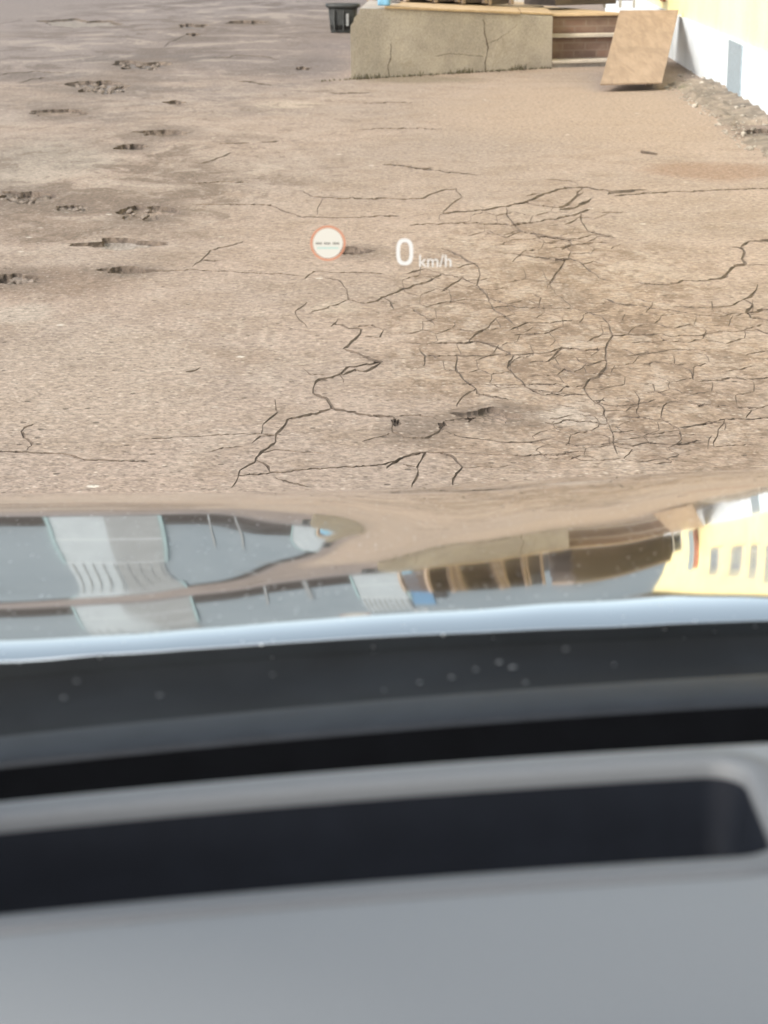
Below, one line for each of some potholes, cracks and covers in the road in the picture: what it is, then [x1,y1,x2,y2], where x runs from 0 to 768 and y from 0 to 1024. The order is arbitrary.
pothole [28,109,91,118]
pothole [115,205,180,222]
pothole [64,80,131,95]
pothole [132,129,191,137]
pothole [112,60,172,70]
pothole [95,266,163,274]
pothole [0,191,58,205]
pothole [450,406,524,425]
pothole [69,237,169,250]
pothole [339,246,375,255]
pothole [0,273,46,285]
crack [0,164,768,488]
